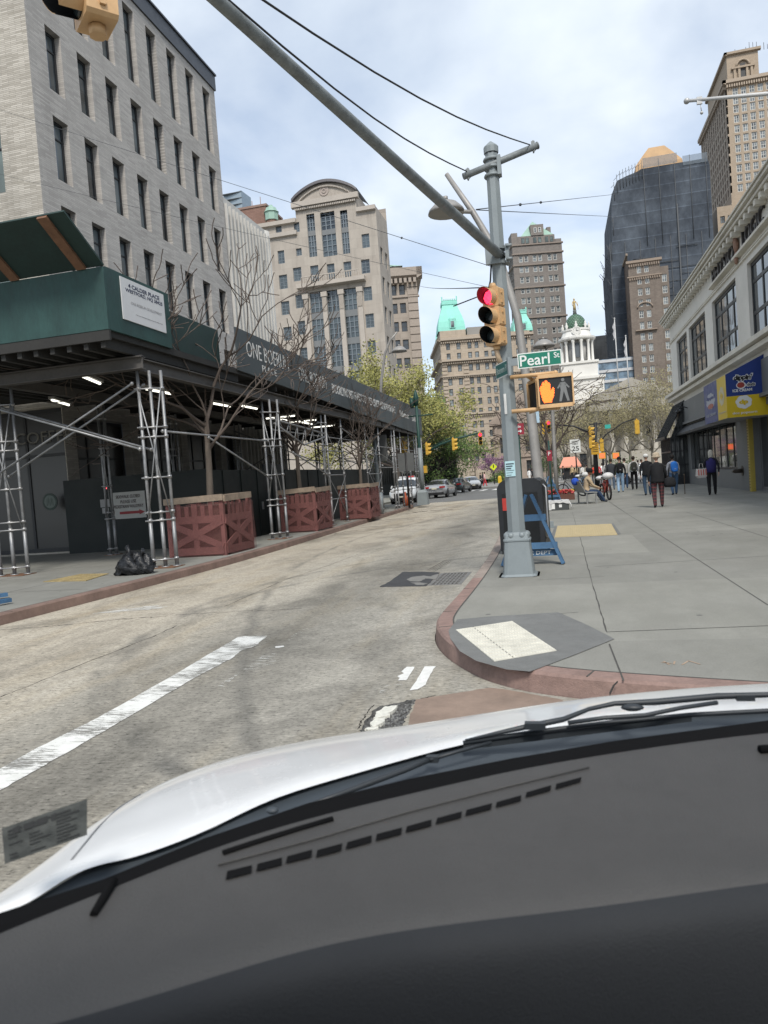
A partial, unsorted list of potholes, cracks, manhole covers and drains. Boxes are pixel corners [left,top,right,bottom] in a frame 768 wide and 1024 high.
drain grate [427,572,472,586]
pothole [359,699,416,732]
